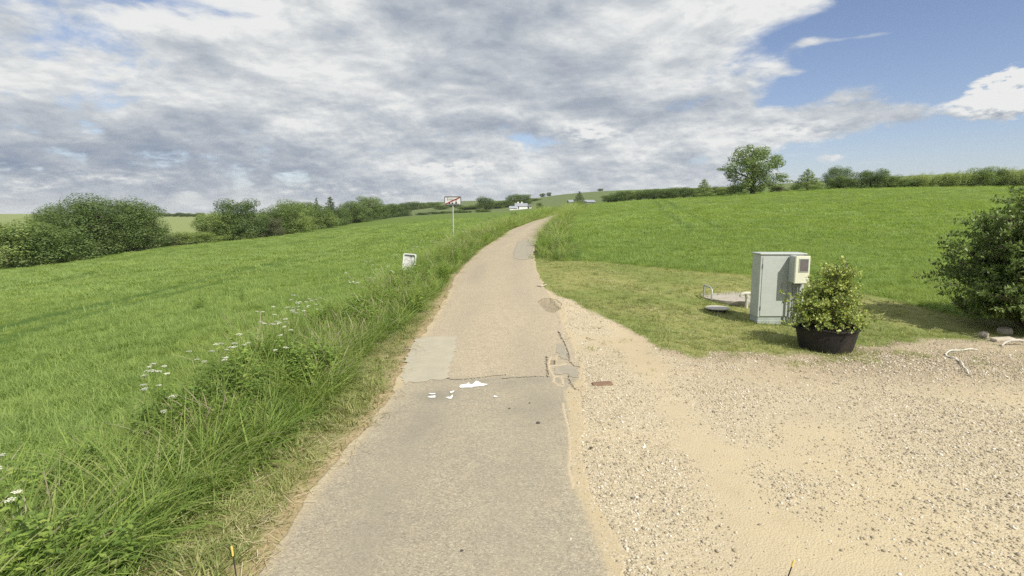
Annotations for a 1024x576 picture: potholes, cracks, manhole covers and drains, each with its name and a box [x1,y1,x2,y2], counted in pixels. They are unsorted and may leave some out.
manhole cover [705,305,729,313]
